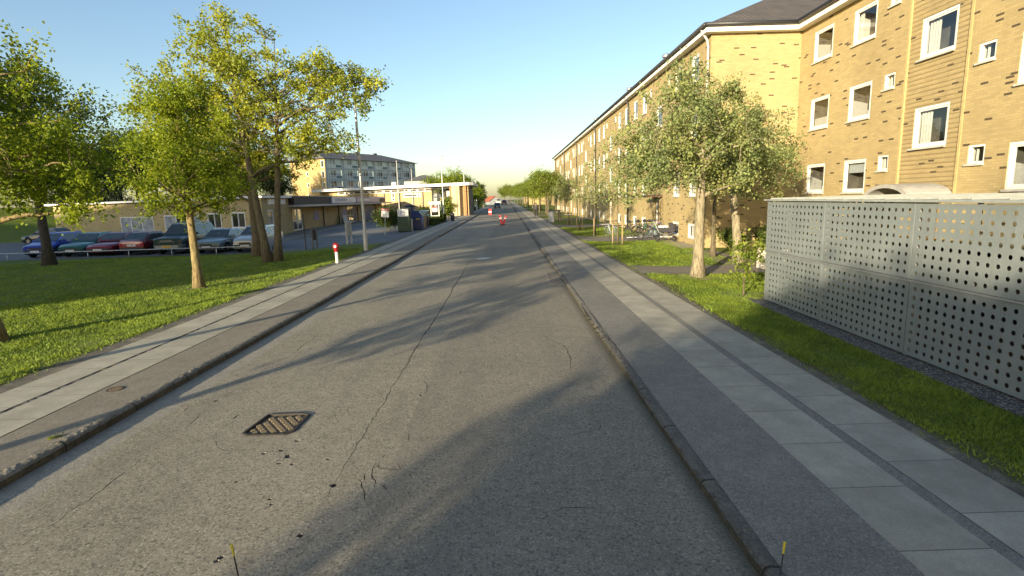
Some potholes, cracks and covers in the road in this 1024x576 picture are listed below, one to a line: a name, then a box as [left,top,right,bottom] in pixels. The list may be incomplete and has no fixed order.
crack [25,458,144,544]
crack [326,265,468,503]
